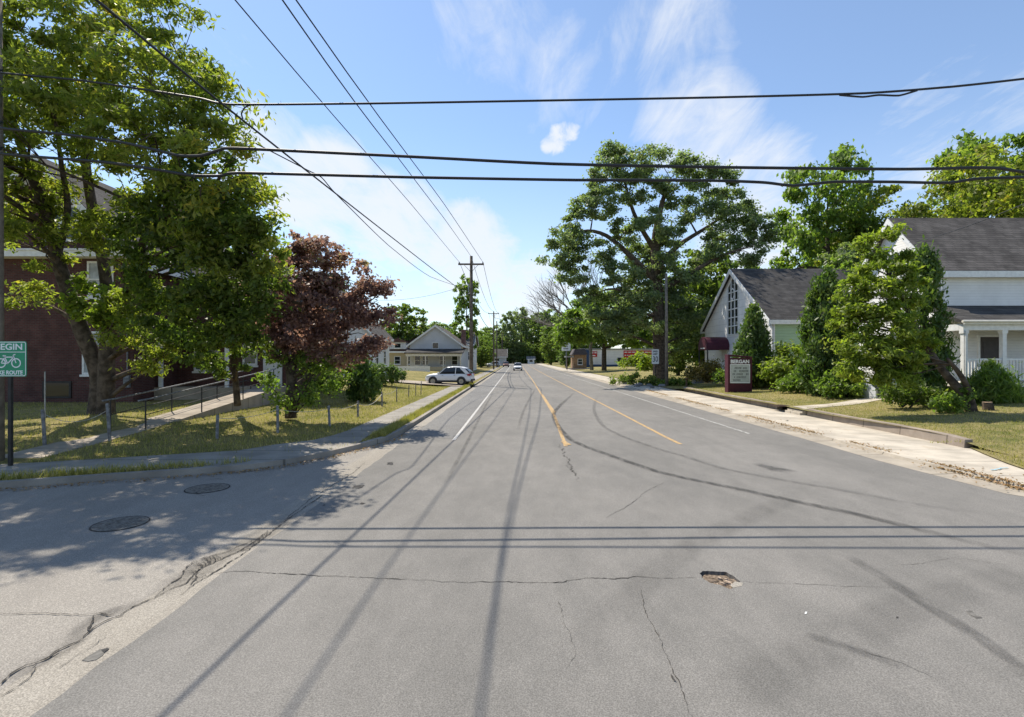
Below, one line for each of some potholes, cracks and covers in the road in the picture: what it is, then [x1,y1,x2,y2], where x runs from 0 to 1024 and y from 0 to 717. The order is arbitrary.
crack [1,612,122,696]
pothole [700,571,740,589]
crack [433,576,693,717]
manhole cover [89,516,150,532]
manhole cover [184,483,230,494]
